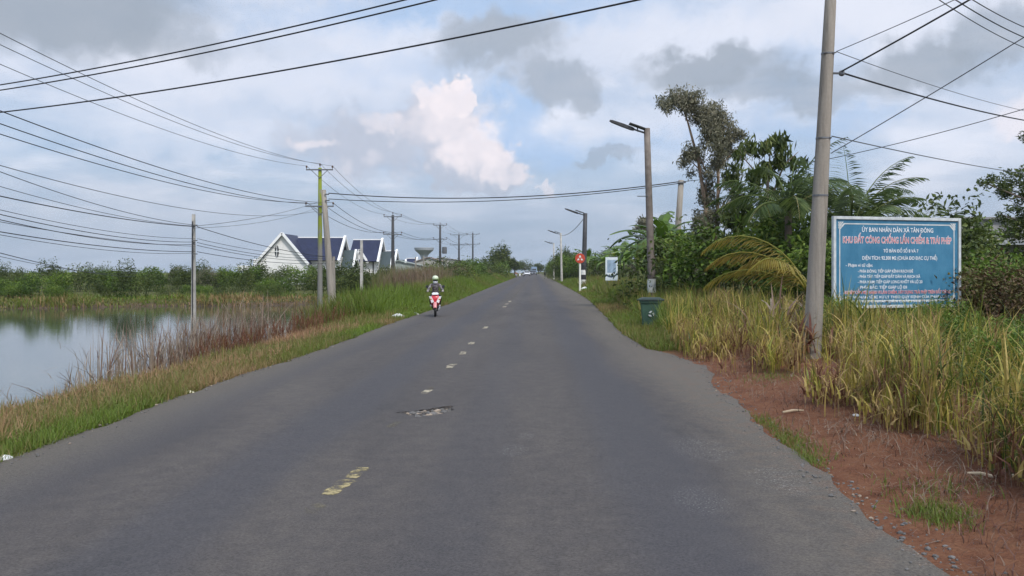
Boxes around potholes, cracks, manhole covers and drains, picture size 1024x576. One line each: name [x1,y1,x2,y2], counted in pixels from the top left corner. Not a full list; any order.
pothole [397,406,454,417]
